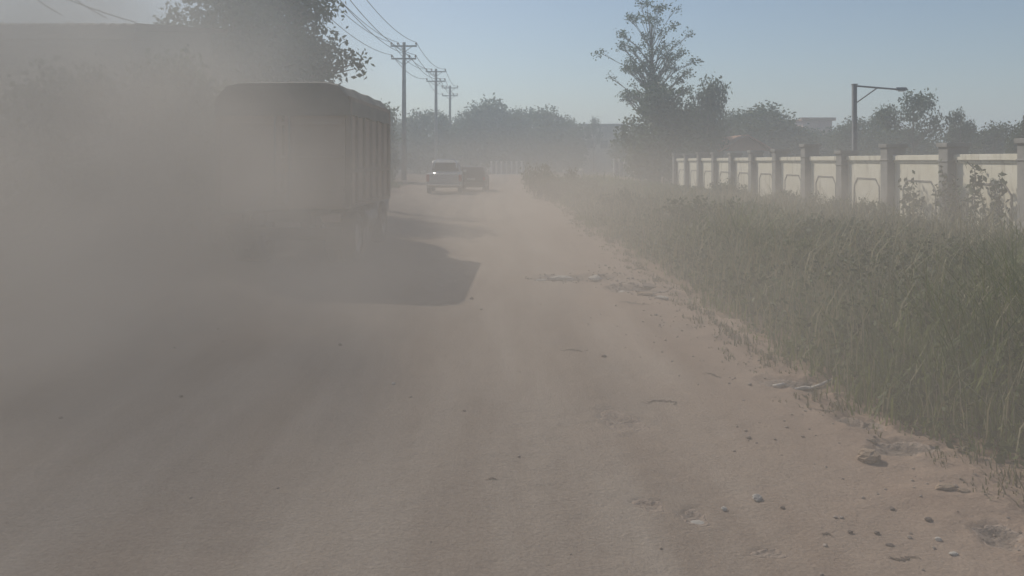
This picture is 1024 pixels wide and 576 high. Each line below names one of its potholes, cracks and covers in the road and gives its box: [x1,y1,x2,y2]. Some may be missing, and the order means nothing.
pothole [971,525,1024,551]
pothole [600,410,651,431]
